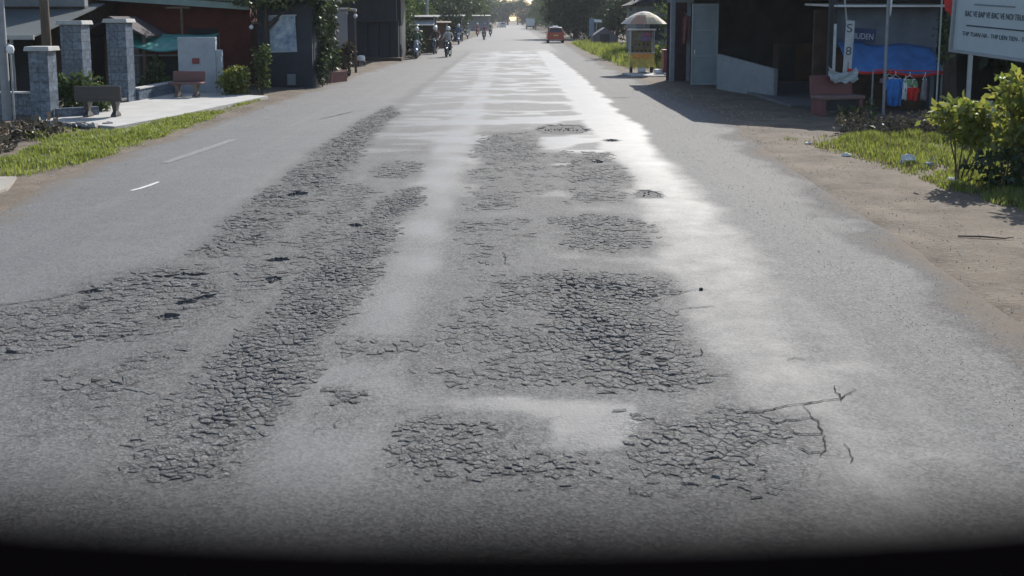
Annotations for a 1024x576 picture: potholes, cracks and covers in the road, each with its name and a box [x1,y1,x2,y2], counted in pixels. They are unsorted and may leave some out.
crack [0,106,856,508]
pothole [537,124,591,134]
pothole [635,190,661,198]
pothole [155,313,180,321]
pothole [172,293,217,306]
